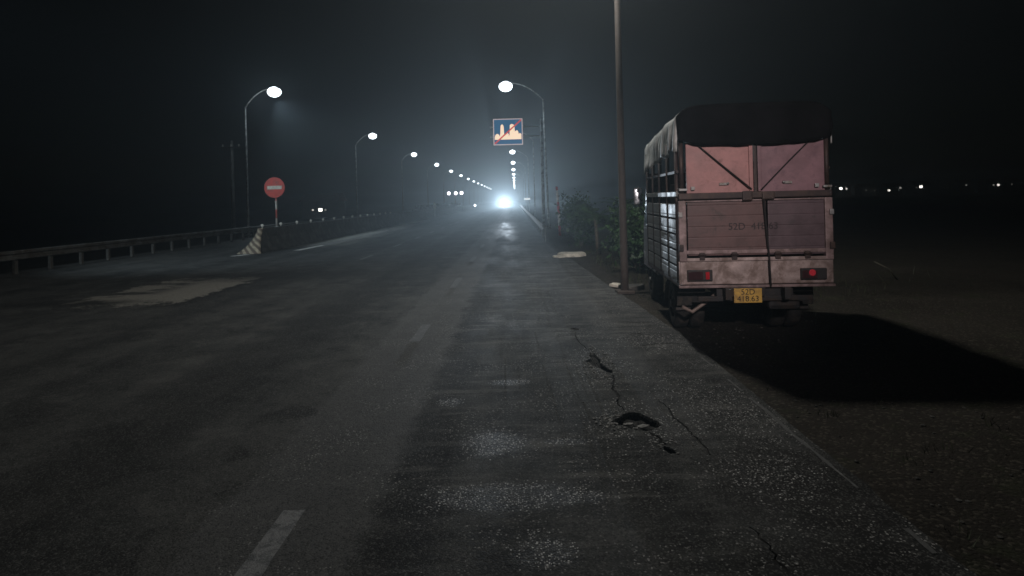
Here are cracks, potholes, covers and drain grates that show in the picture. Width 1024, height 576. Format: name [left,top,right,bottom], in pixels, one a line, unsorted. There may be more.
crack [611,375,624,410]
crack [749,526,792,576]
crack [650,401,711,455]
pothole [612,412,661,431]
